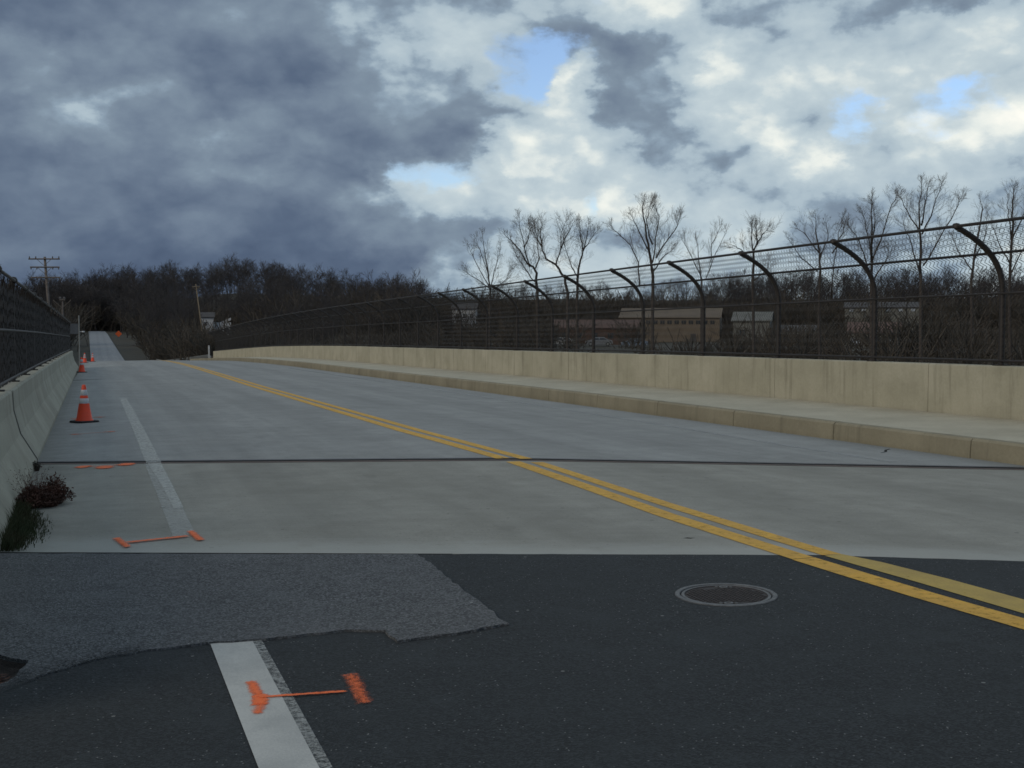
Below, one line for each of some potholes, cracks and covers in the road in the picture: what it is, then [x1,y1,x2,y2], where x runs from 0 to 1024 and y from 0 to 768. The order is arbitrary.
pothole [0,659,26,684]
manhole cover [675,583,778,607]
